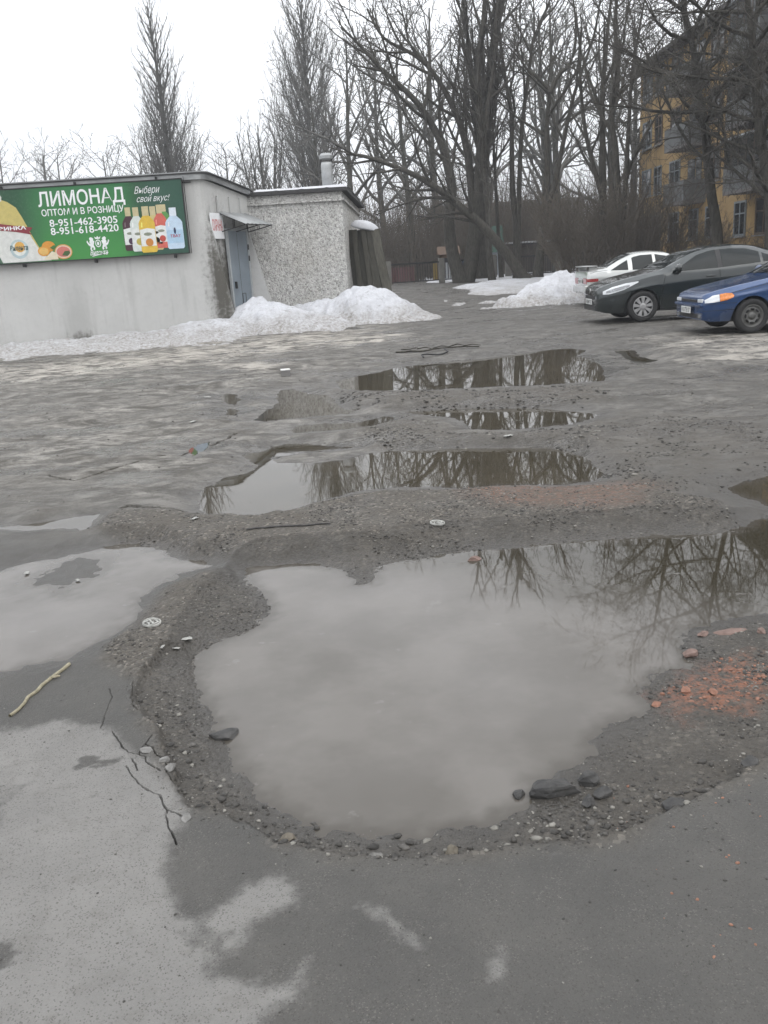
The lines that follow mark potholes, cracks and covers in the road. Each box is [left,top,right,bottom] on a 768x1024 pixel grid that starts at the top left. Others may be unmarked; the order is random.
pothole [312,344,635,391]
pothole [120,503,768,867]
pothole [165,433,636,515]
pothole [385,396,622,432]
crack [96,677,184,850]
pothole [0,521,240,681]
